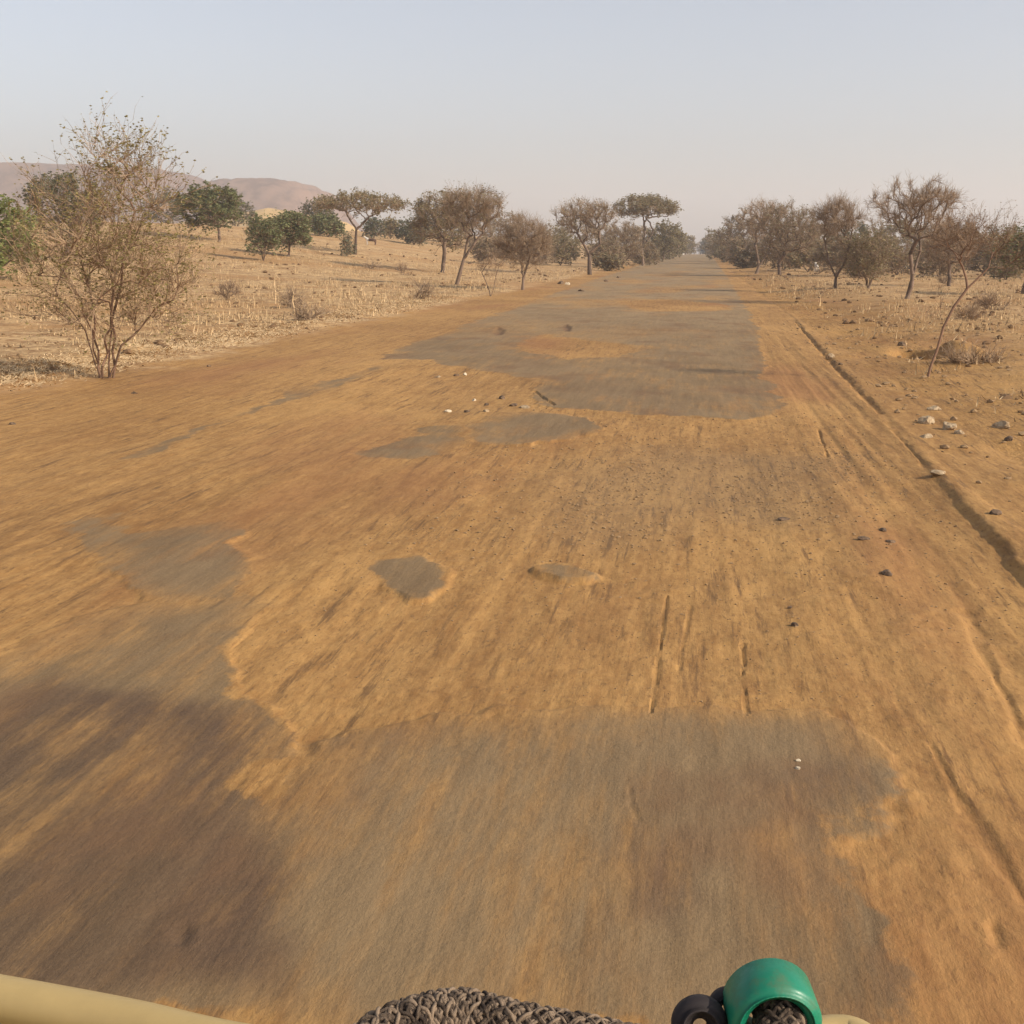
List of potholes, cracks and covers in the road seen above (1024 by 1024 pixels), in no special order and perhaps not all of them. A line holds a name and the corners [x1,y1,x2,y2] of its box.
crack [648,595,694,714]
crack [737,642,751,716]
